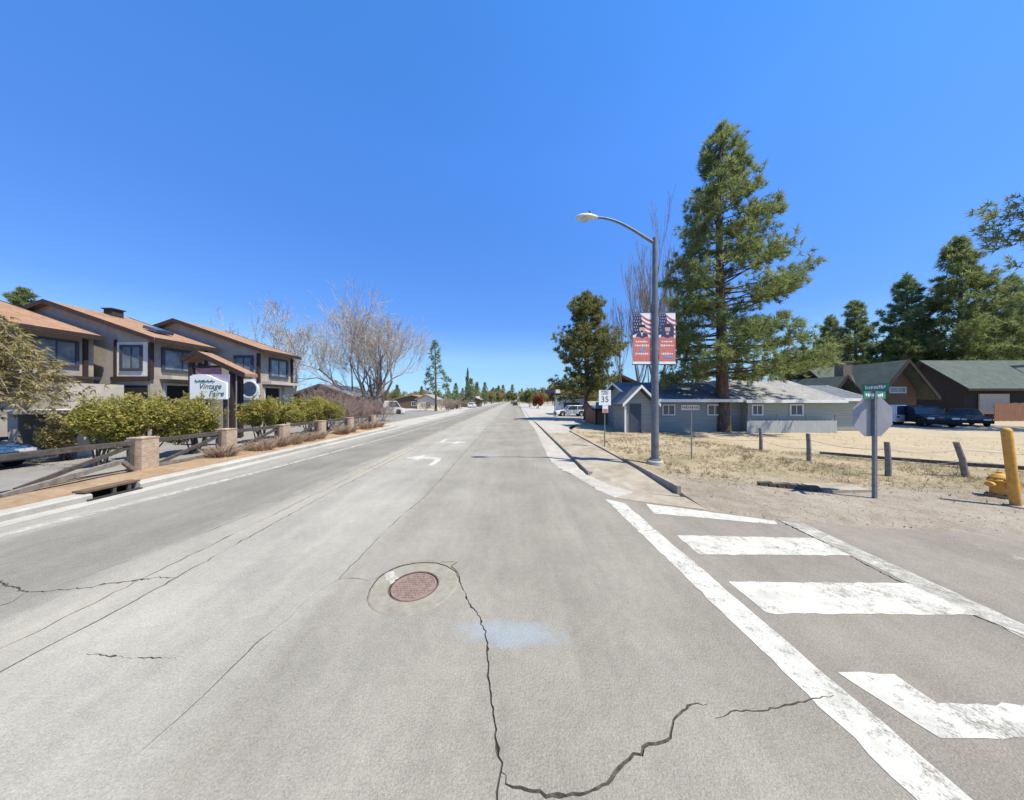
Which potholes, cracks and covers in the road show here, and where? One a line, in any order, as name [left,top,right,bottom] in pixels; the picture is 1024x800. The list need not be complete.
crack [0,577,175,606]
crack [378,561,832,800]
manhole cover [366,563,459,616]
